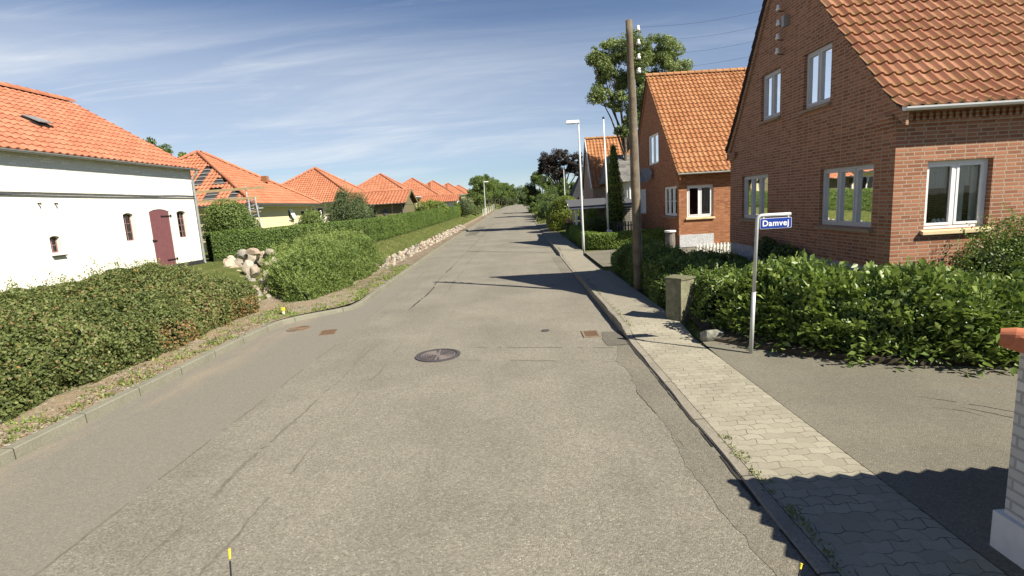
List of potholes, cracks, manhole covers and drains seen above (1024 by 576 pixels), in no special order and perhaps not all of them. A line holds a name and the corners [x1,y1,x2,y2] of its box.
crack [921,396,1014,418]
crack [472,332,818,576]
manhole cover [415,348,460,362]
drain grate [581,330,601,338]
crack [408,225,497,311]
crack [135,340,405,576]
